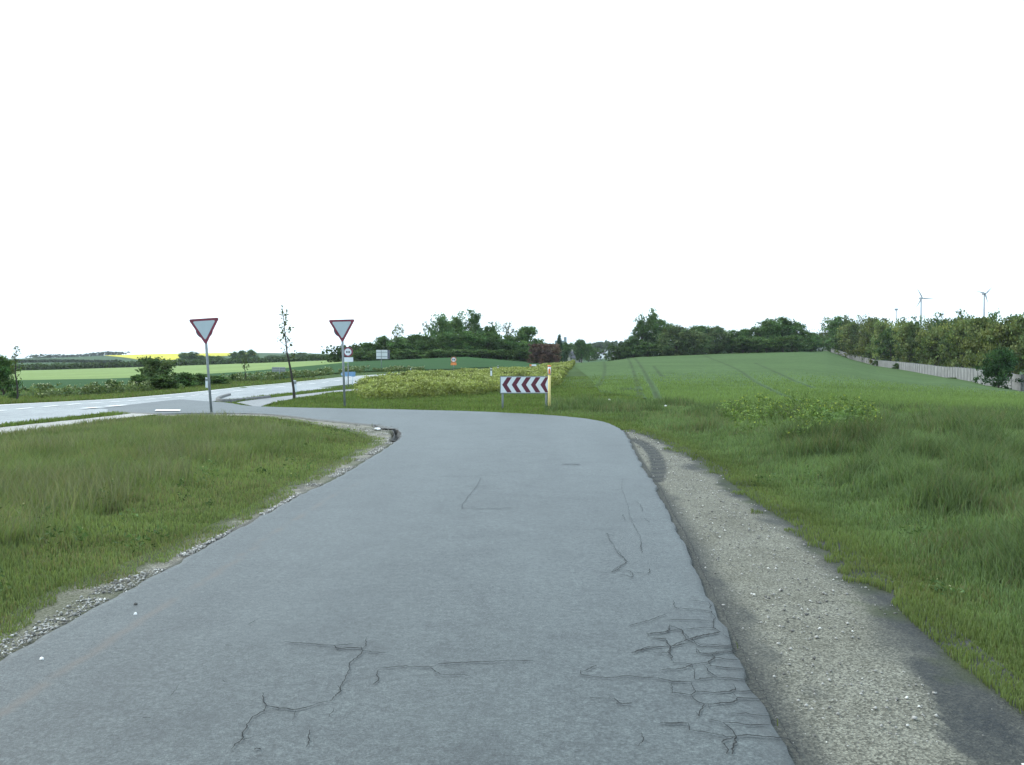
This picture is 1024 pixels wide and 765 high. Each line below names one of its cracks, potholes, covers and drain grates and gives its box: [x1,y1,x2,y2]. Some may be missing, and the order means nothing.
crack [604,482,650,577]
crack [231,637,533,749]
crack [615,456,800,757]
